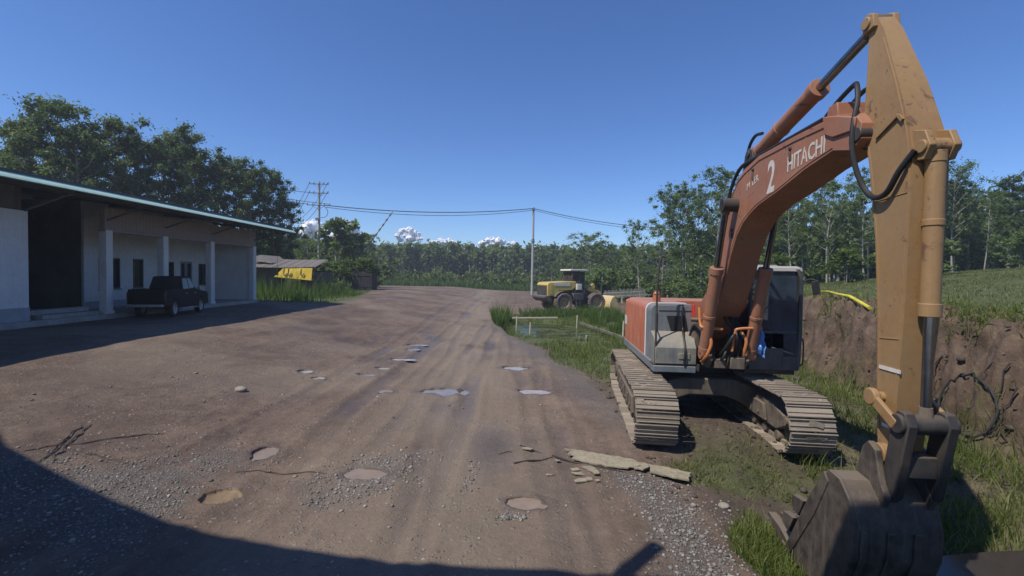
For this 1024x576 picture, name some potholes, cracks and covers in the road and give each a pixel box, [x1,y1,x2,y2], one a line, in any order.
pothole [488,490,561,518]
pothole [180,482,257,513]
pothole [325,463,405,486]
pothole [405,385,485,400]
crack [24,425,165,464]
pothole [506,387,563,397]
pothole [491,364,541,372]
pothole [235,441,293,466]
